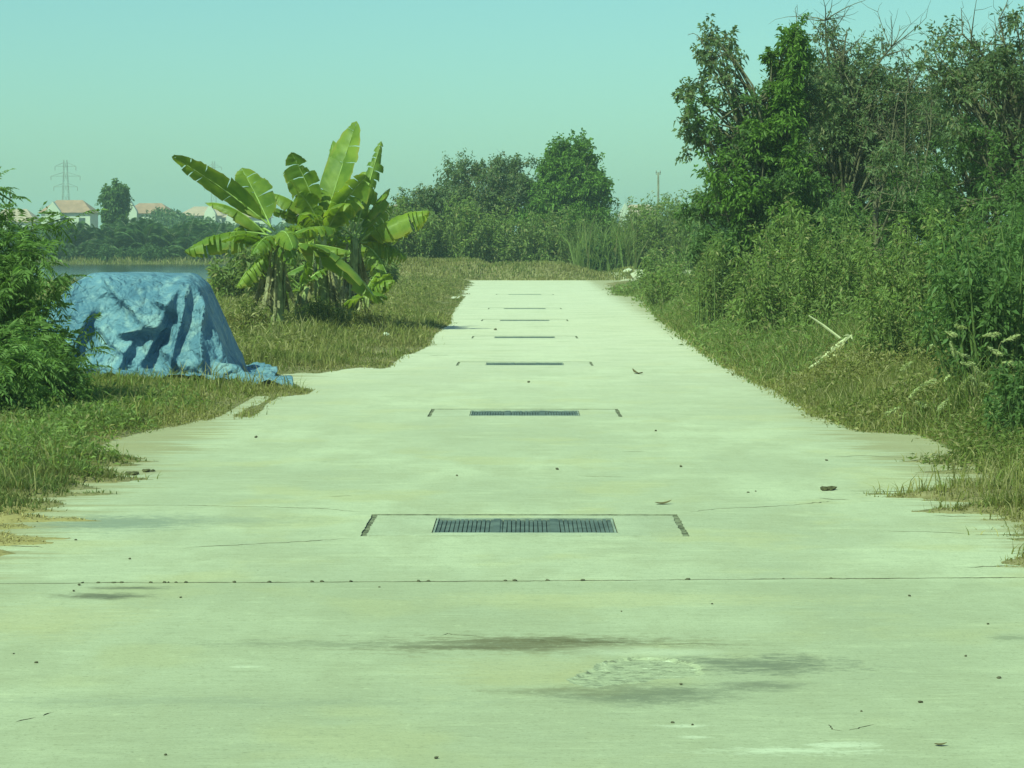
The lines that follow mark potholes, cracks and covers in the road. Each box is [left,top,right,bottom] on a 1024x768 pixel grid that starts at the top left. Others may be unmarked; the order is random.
crack [693,490,914,512]
crack [186,539,335,548]
